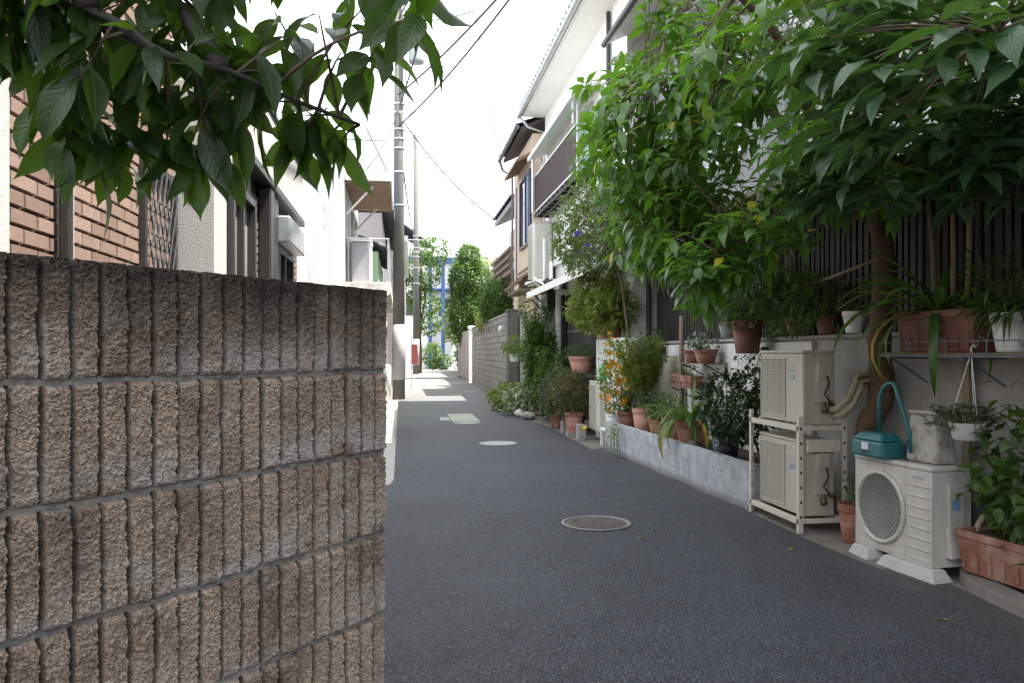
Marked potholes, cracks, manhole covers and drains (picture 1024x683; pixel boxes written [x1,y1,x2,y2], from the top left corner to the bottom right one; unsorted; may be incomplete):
manhole cover [561,515,633,531]
